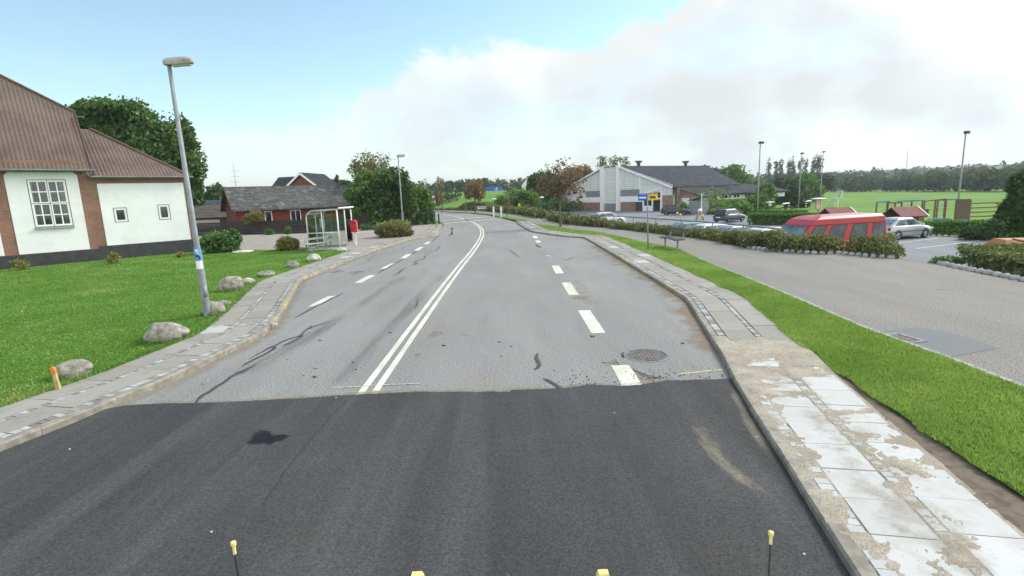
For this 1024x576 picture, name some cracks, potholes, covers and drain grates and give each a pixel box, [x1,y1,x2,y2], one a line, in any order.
drain grate [888,333,927,343]
manhole cover [624,348,671,363]
